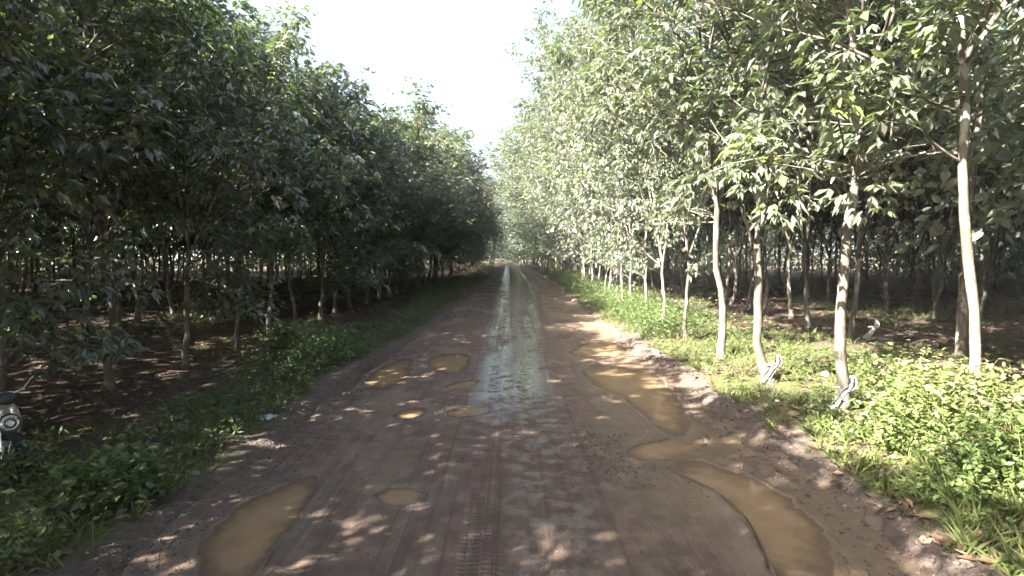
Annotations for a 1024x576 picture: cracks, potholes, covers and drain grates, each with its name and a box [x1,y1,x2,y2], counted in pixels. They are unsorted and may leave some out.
pothole [356,355,415,393]
pothole [664,455,851,576]
pothole [391,407,427,420]
pothole [373,485,429,509]
pothole [622,433,712,462]
pothole [440,379,481,390]
pothole [445,404,495,419]
pothole [577,361,701,445]
pothole [565,339,631,358]
pothole [423,352,474,377]
pothole [187,470,325,576]
